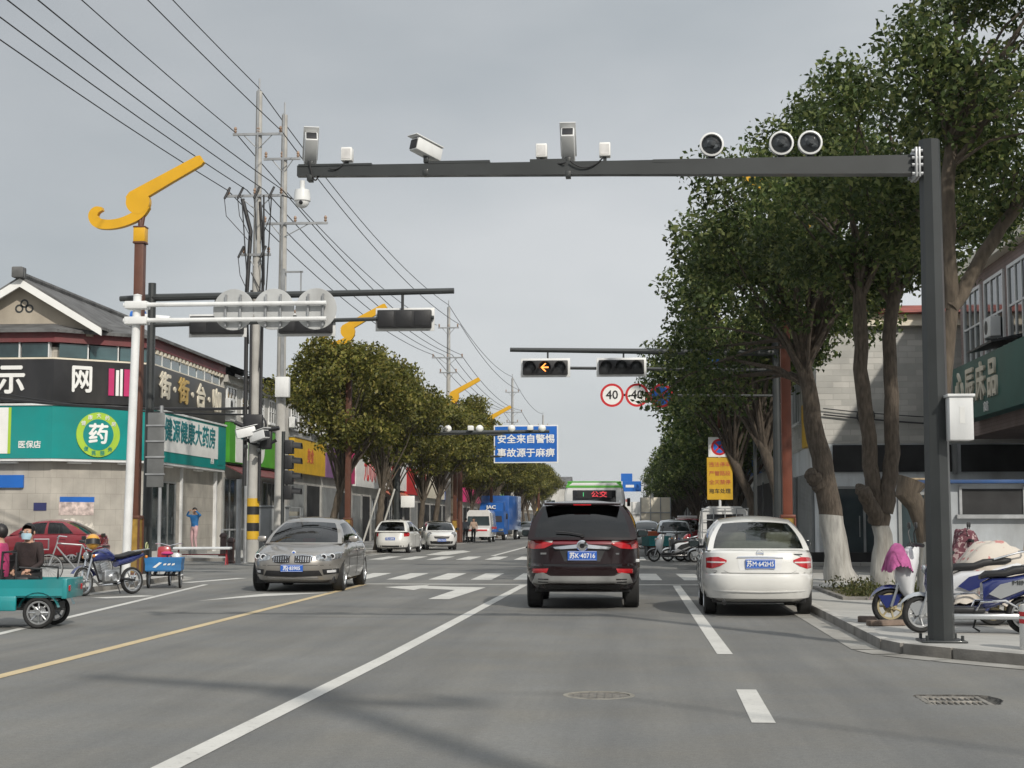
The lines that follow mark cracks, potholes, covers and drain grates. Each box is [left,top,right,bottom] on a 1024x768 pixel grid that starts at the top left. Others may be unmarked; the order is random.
drain grate [915,696,994,705]
manhole cover [563,691,635,699]
